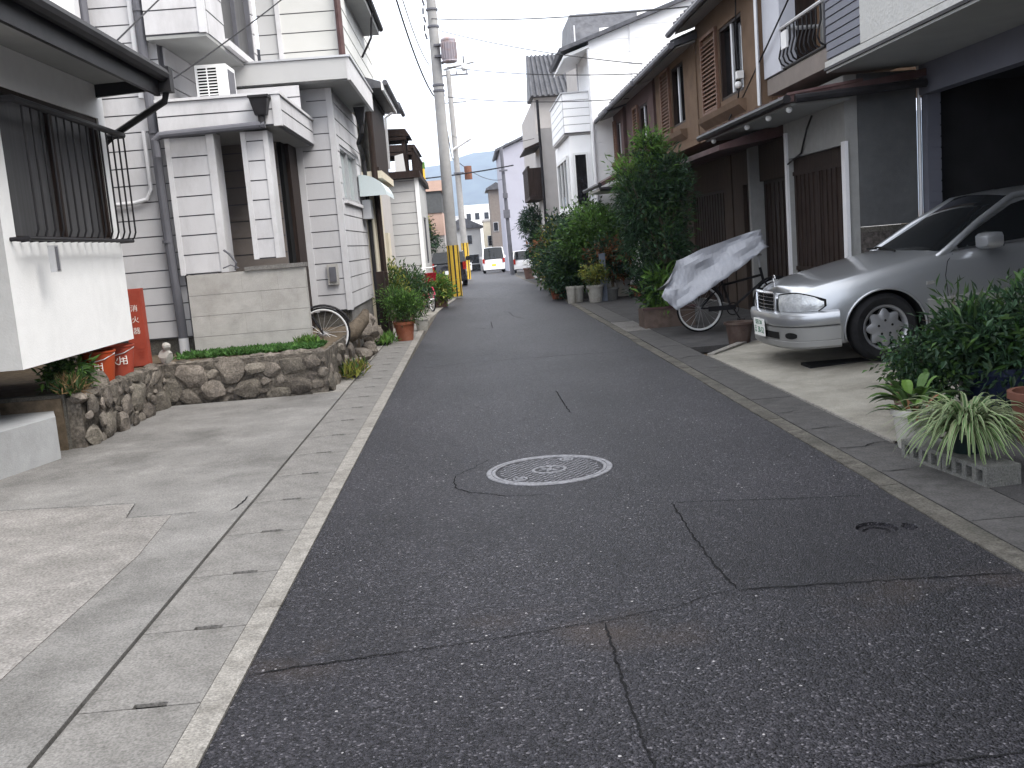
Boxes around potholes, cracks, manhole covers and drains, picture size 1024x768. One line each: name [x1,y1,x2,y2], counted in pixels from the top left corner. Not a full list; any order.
utility cover [855,522,898,534]
crack [251,495,1005,768]
manhole cover [486,455,613,486]
crack [453,460,543,496]
